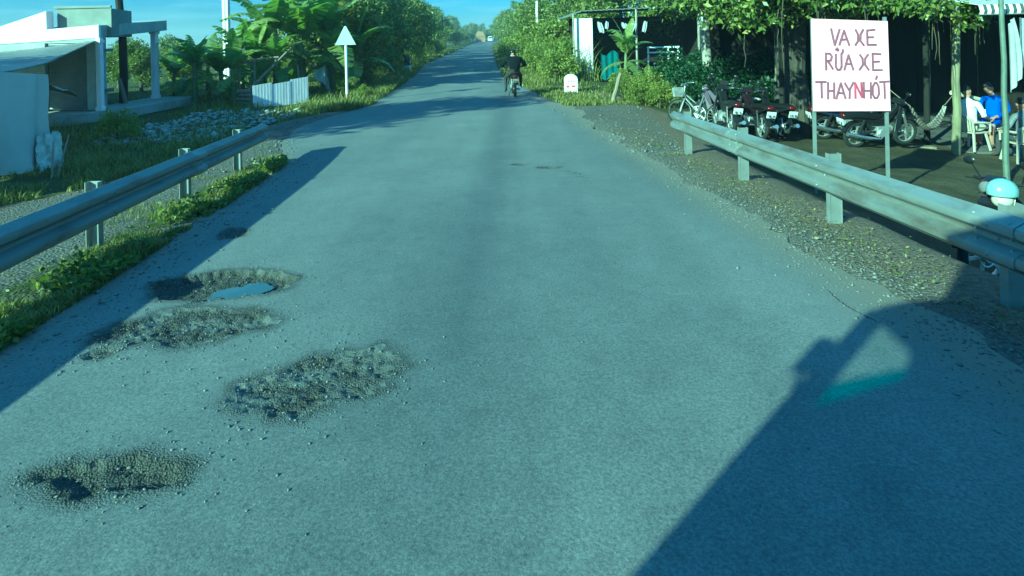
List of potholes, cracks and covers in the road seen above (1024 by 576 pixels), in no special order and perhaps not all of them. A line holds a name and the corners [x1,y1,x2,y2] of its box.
pothole [19,451,188,505]
pothole [90,307,282,349]
pothole [224,343,408,421]
crack [827,289,880,323]
pothole [147,269,299,302]
